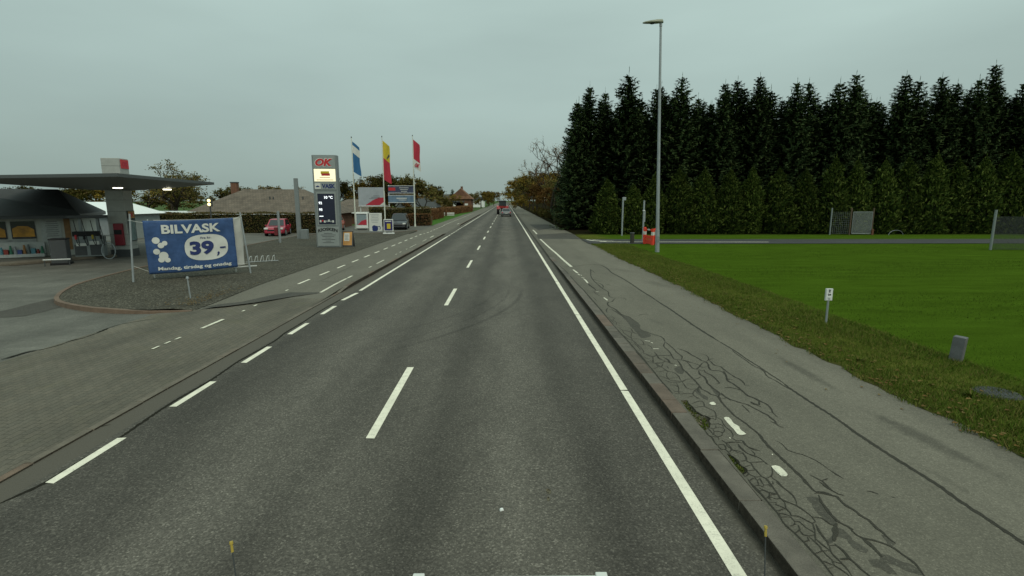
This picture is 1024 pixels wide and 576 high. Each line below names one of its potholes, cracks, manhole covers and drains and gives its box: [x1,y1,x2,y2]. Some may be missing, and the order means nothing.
crack [560,266,925,576]
